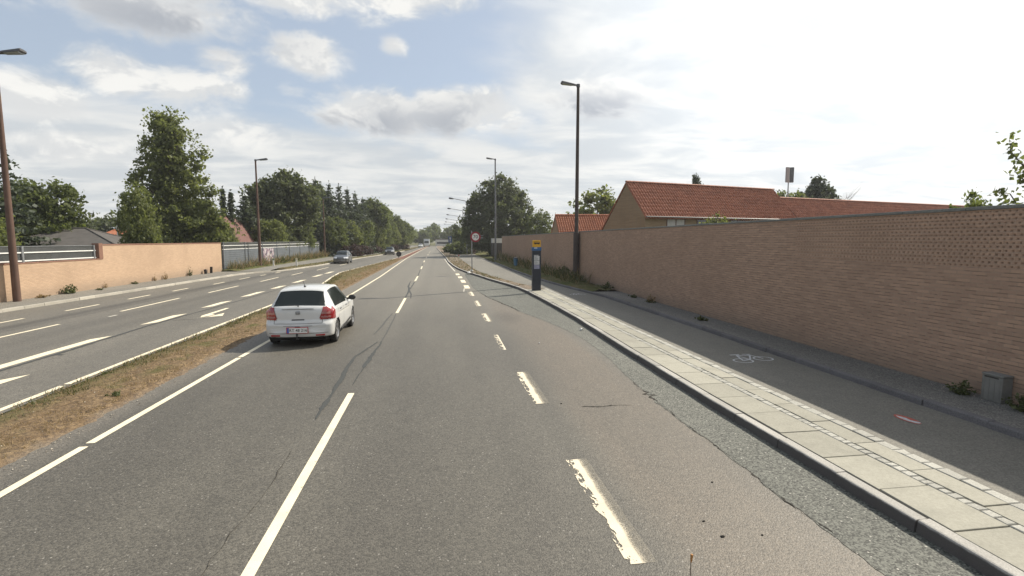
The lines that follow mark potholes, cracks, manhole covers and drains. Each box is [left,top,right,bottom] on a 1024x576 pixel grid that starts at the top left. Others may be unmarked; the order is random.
crack [202,453,290,574]
